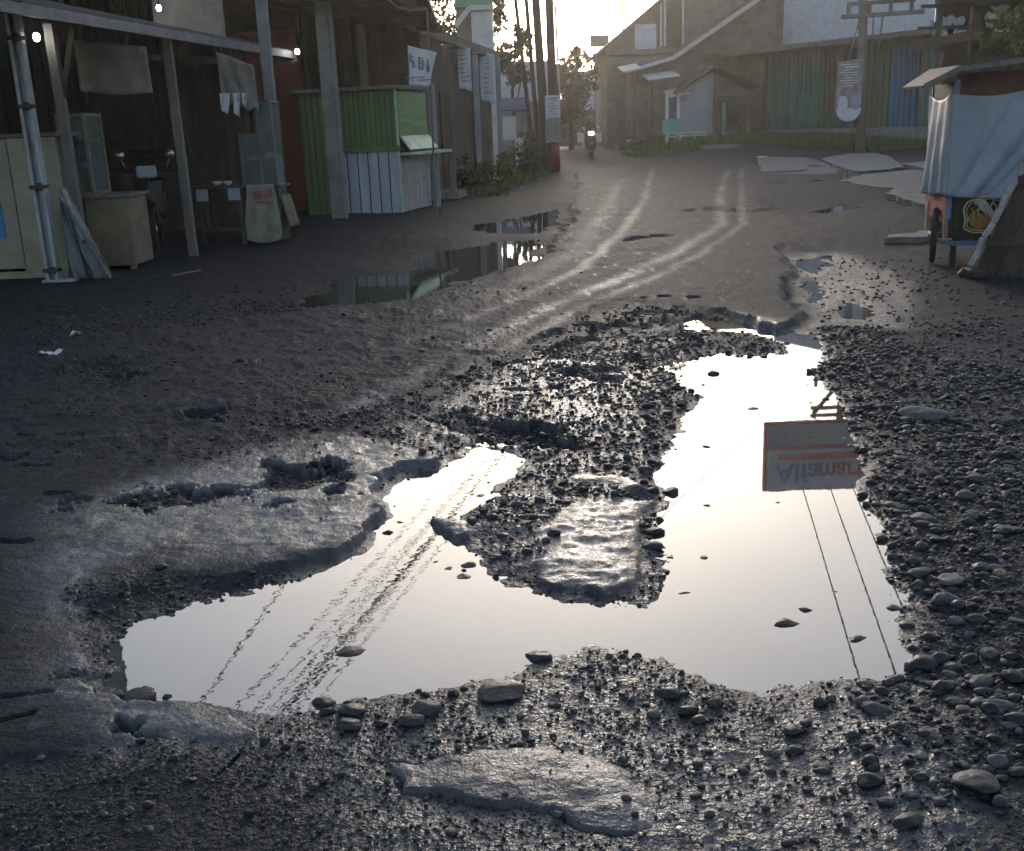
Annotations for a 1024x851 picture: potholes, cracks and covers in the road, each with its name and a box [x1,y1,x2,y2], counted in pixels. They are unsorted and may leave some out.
pothole [276,237,550,311]
pothole [817,298,886,323]
pothole [215,299,294,317]
pothole [789,276,838,305]
pothole [787,253,846,275]
pothole [69,311,954,734]
pothole [462,208,569,235]
pothole [810,203,864,214]
